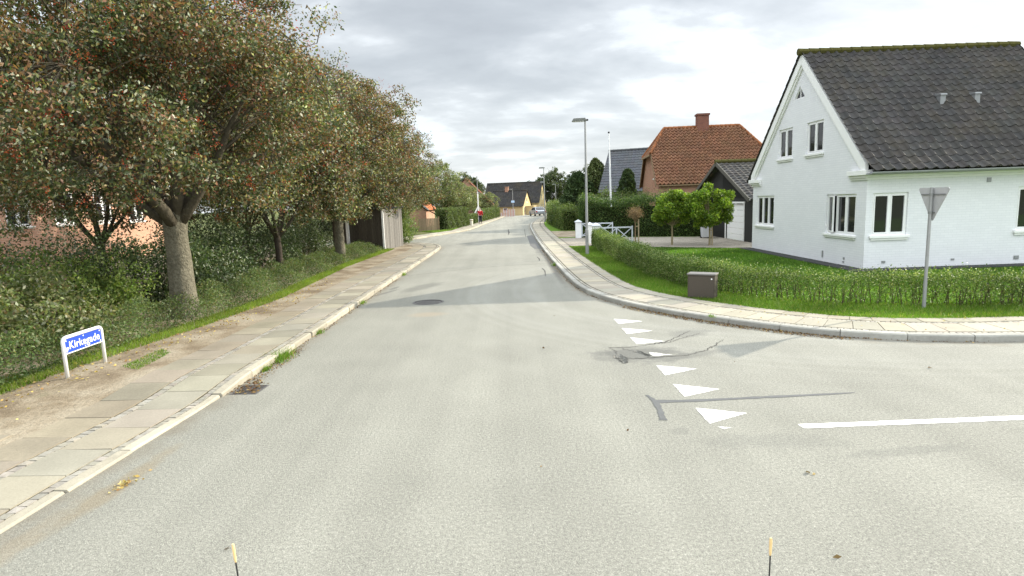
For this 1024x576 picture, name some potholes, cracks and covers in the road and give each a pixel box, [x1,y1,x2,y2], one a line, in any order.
drain grate [229,385,269,395]
crack [610,333,718,359]
